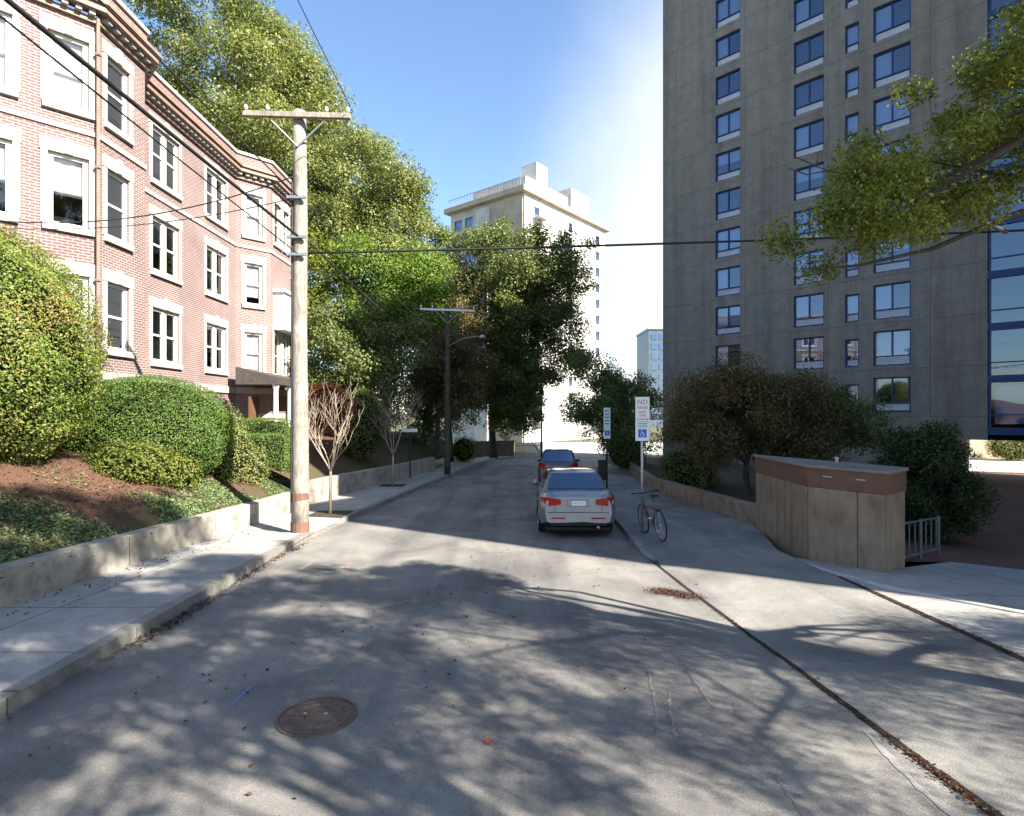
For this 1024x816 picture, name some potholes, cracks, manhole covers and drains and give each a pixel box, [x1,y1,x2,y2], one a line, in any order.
crack [647,660,714,743]
manhole cover [274,697,358,738]
